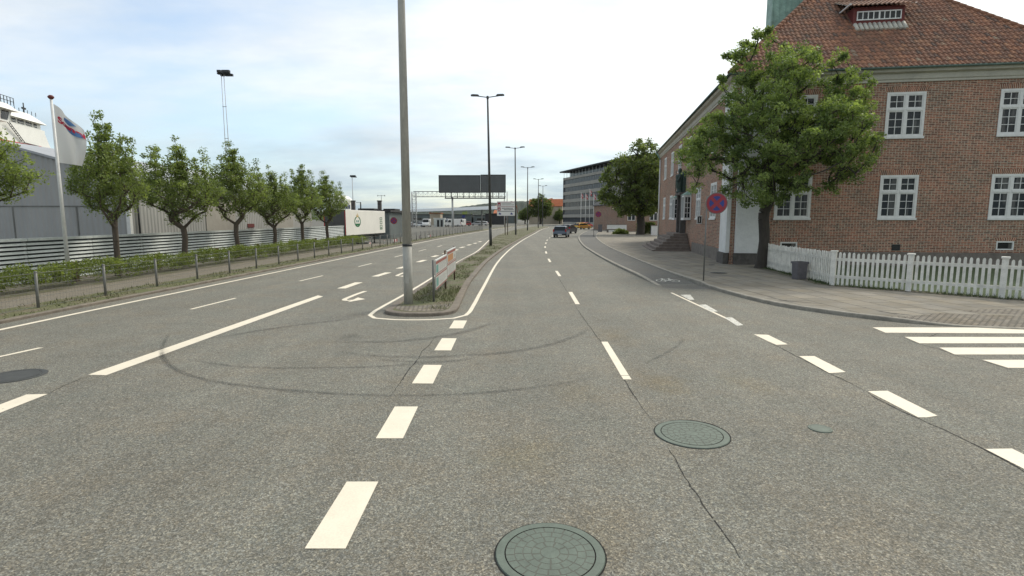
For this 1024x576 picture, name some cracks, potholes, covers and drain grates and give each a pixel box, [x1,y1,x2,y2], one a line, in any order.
manhole cover [0,369,49,383]
manhole cover [654,420,731,449]
utility cover [808,424,833,433]
manhole cover [494,523,607,576]
crack [668,448,739,556]
